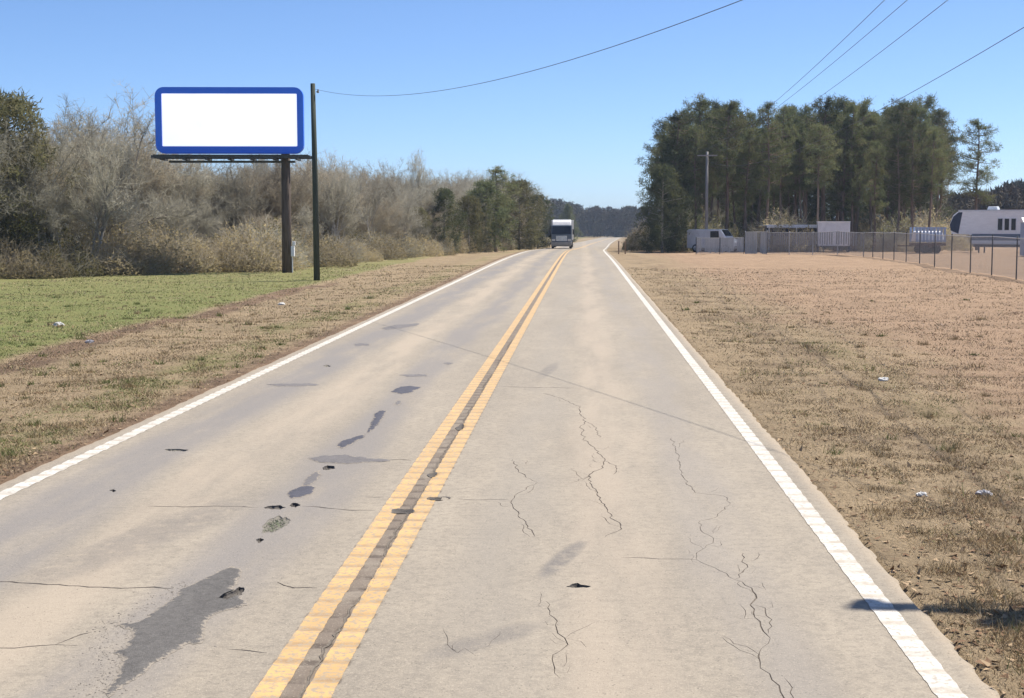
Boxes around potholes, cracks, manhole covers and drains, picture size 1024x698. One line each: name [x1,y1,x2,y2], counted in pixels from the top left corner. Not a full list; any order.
crack [0,581,172,589]
crack [539,592,589,673]
crack [723,554,794,698]
pothole [220,587,245,599]
crack [543,393,622,537]
crack [670,438,740,578]
